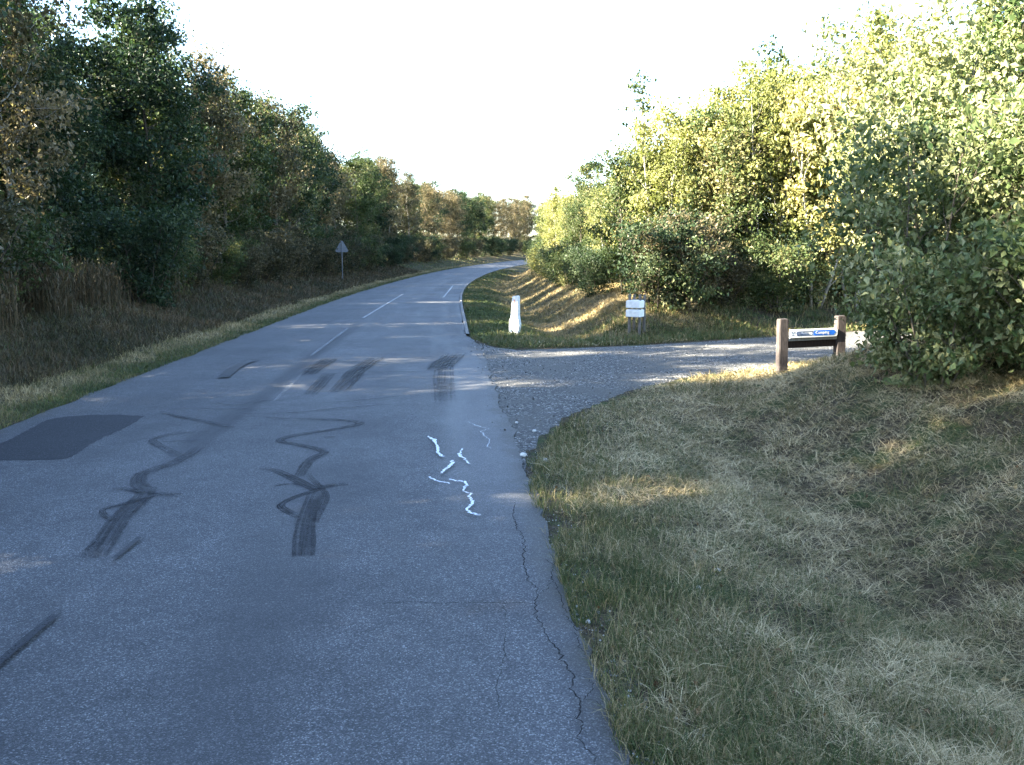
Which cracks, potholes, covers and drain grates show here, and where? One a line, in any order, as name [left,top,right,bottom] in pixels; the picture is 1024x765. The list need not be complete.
crack [512,503,617,755]
